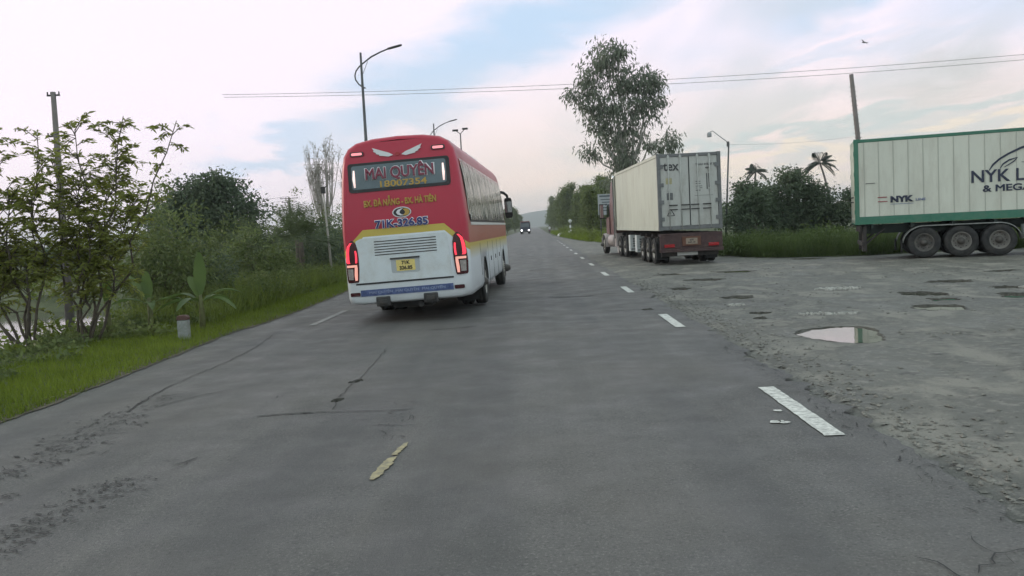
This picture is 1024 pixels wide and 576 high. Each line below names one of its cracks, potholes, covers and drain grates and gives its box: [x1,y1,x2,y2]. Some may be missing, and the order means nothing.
crack [261,349,416,439]
crack [0,335,272,479]
pothole [792,326,886,343]
crack [914,536,1024,576]
